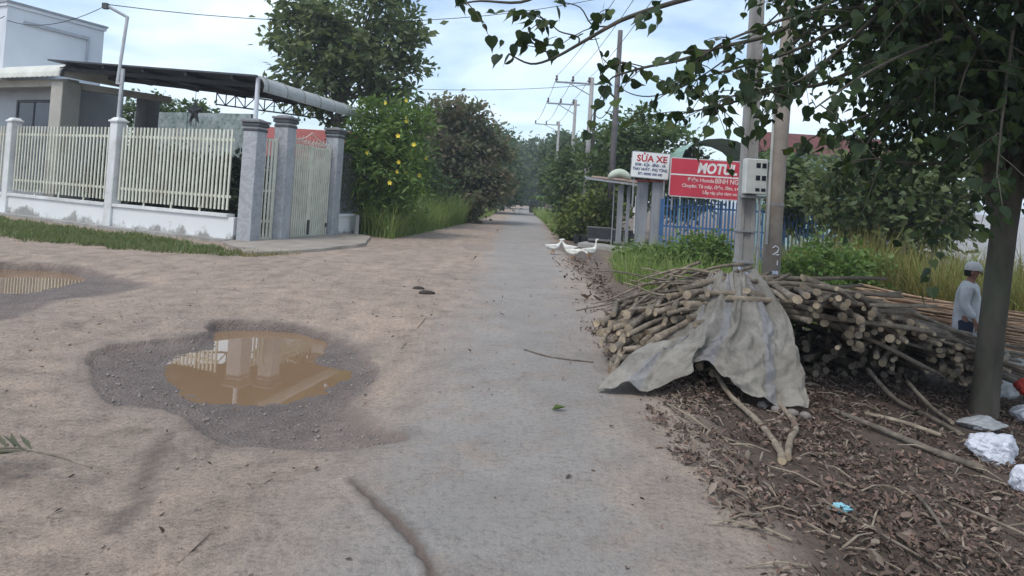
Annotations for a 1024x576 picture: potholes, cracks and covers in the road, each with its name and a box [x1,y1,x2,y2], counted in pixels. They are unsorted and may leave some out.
pothole [0,260,156,324]
crack [332,472,460,576]
pothole [61,315,426,462]
